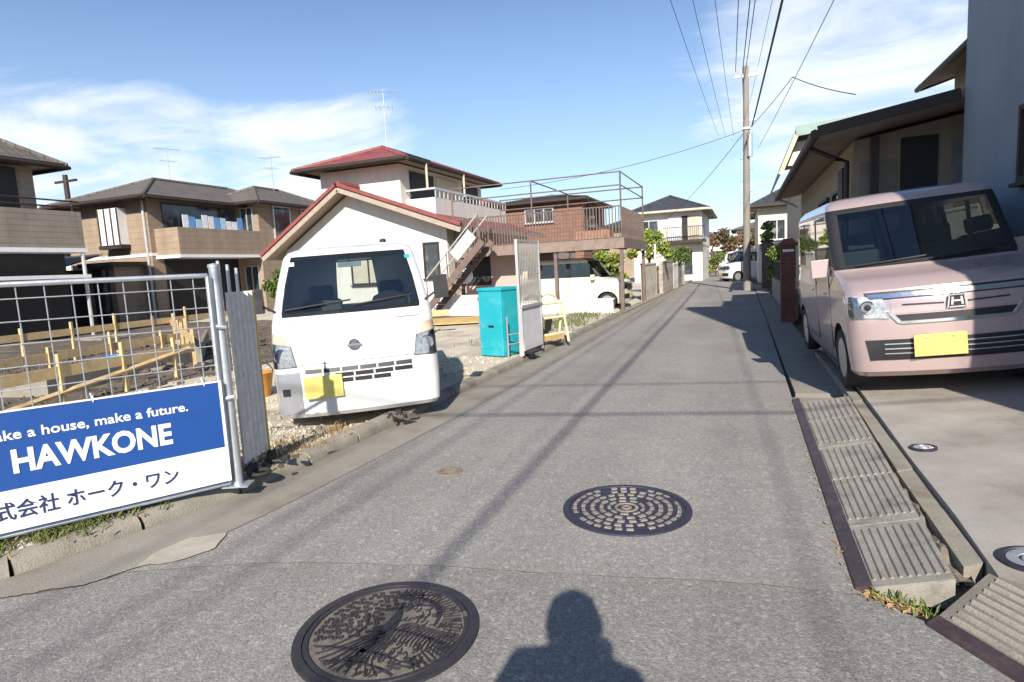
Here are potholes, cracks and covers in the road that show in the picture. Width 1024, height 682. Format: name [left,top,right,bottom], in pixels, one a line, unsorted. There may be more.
manhole cover [291,581,480,682]
manhole cover [563,485,693,537]
manhole cover [437,467,463,476]
